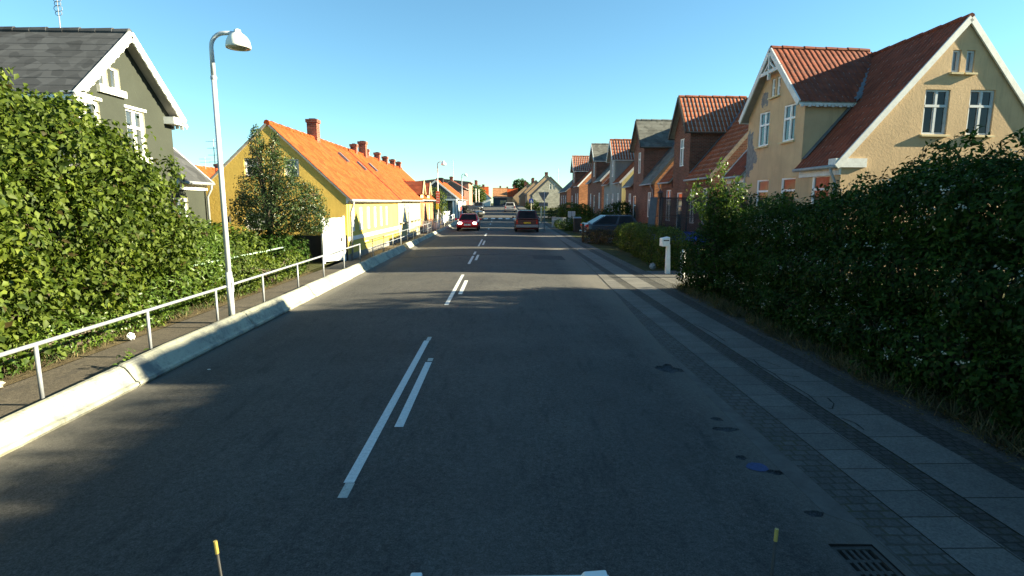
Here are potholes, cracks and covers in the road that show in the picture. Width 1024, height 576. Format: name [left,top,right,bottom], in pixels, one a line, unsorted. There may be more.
drain grate [828,544,906,576]
crack [748,358,864,430]
